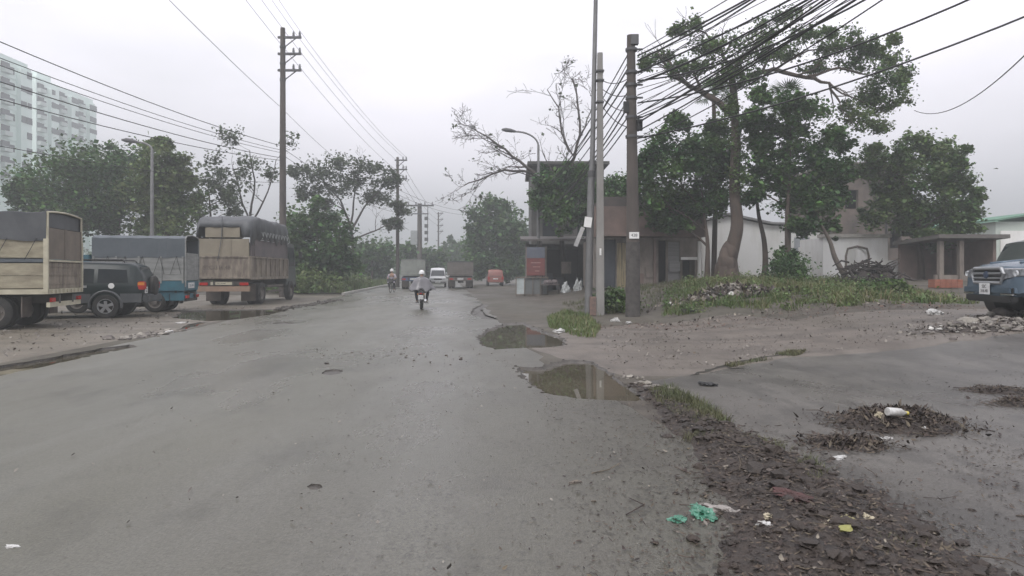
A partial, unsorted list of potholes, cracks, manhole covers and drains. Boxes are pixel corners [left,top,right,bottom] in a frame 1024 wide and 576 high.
crack [692,352,797,375]
pothole [512,359,646,401]
pothole [476,322,568,350]
